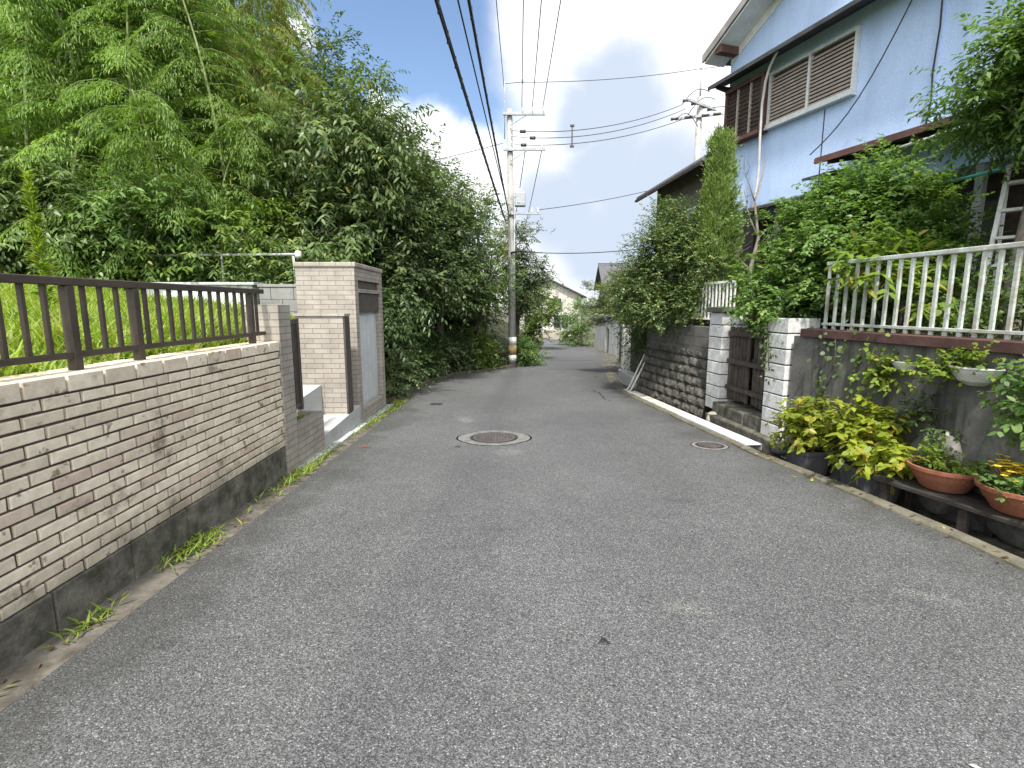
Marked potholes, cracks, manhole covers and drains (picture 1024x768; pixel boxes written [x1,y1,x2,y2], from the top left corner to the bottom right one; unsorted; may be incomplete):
manhole cover [456,430,532,446]
manhole cover [691,441,729,450]
